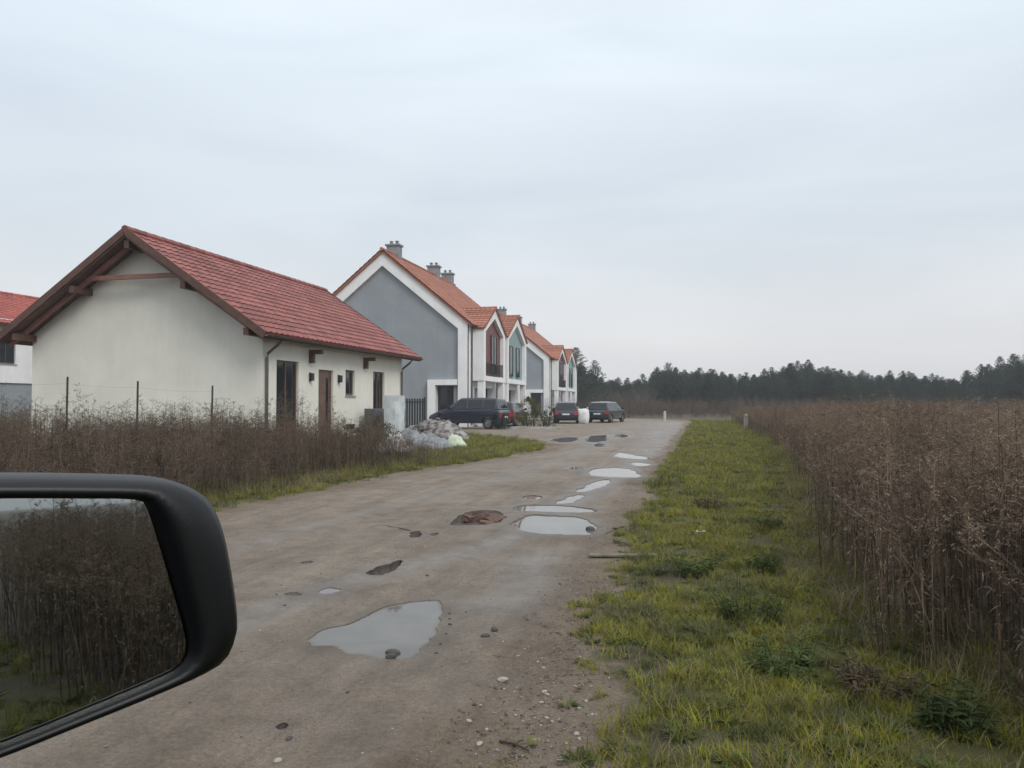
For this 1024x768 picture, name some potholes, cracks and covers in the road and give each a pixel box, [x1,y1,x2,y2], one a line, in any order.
pothole [450,510,503,526]
pothole [307,600,443,659]
pothole [576,479,611,492]
pothole [366,560,403,575]
pothole [513,504,597,512]
pothole [555,494,585,504]
pothole [587,467,642,478]
pothole [509,514,598,535]
